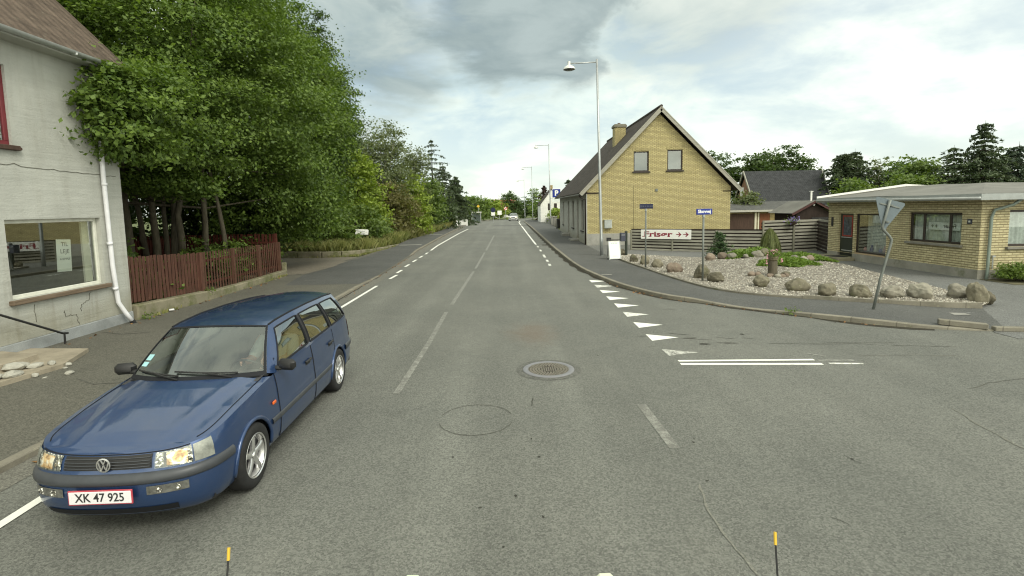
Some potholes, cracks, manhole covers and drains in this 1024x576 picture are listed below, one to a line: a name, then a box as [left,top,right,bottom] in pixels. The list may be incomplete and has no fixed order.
manhole cover [516,360,581,380]
